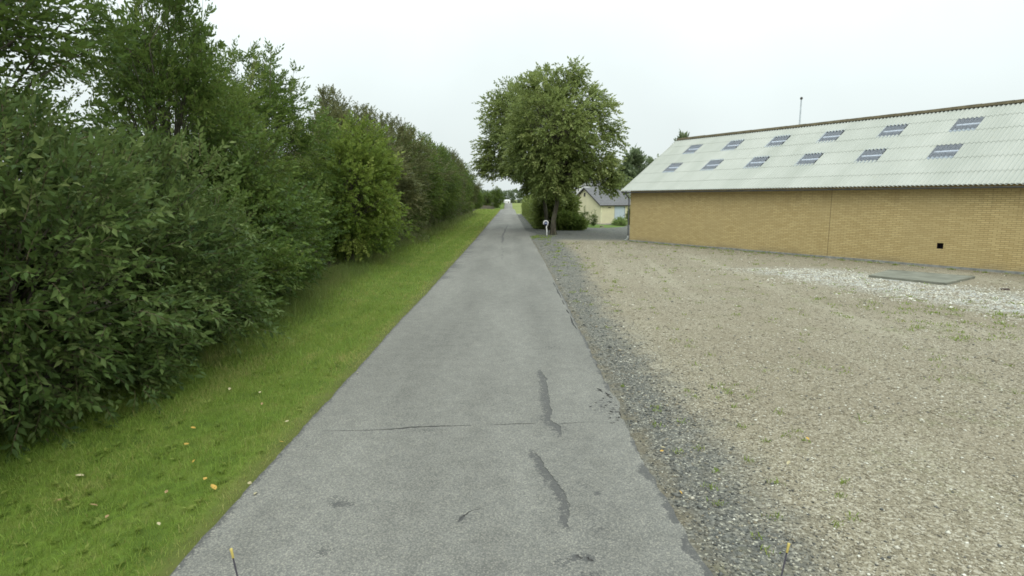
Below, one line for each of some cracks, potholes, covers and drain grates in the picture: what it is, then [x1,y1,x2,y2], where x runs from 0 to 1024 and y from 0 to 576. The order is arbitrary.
crack [341,366,621,537]
